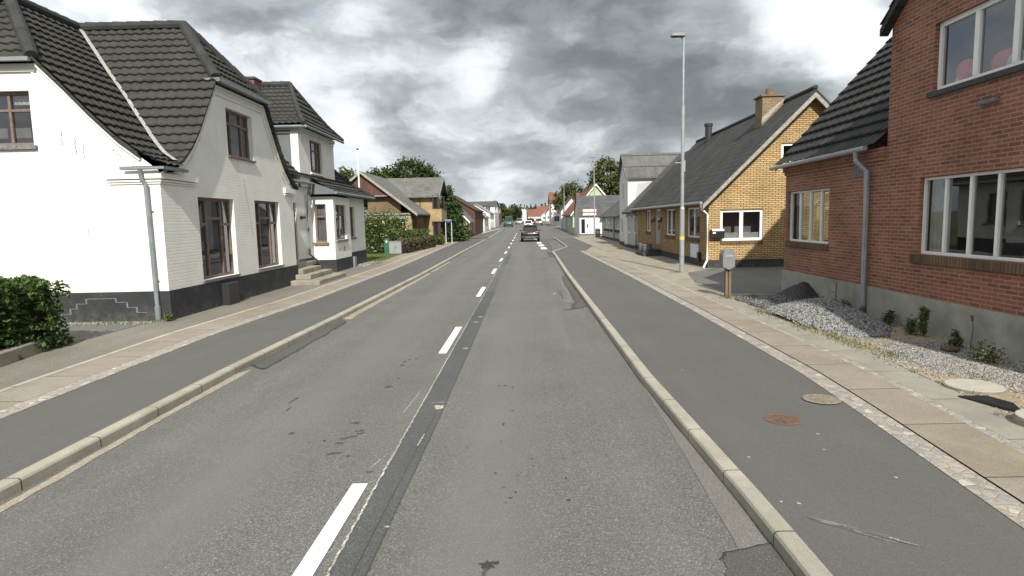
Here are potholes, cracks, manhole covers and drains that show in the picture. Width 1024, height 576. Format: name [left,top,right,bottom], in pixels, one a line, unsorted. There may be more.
manhole cover [802,394,841,404]
manhole cover [764,414,803,425]
